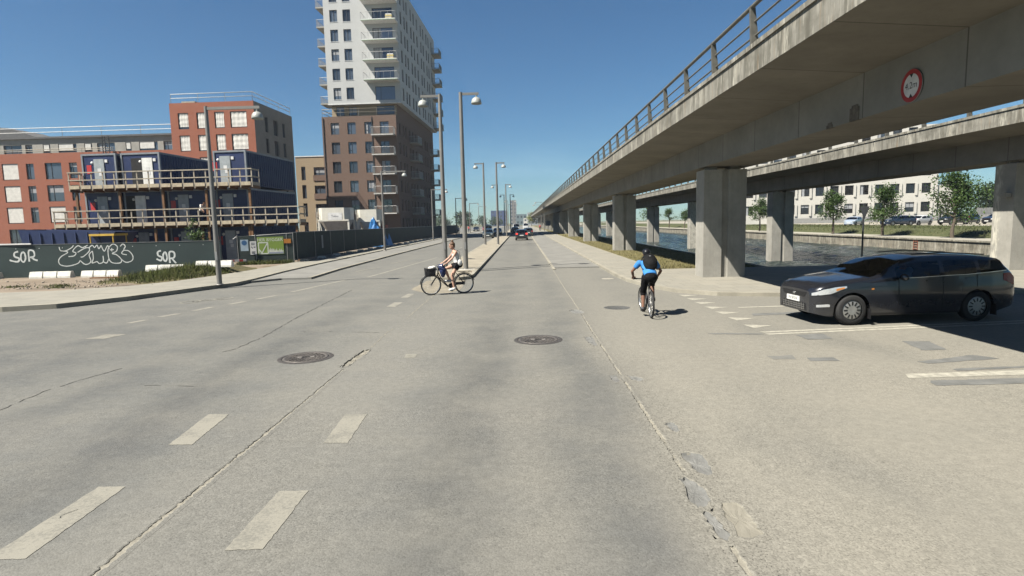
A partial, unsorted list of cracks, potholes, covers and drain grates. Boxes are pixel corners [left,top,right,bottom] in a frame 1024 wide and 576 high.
pothole [672,449,718,479]
manhole cover [514,335,563,345]
pothole [697,506,737,547]
pothole [673,474,717,512]
manhole cover [277,351,334,364]
